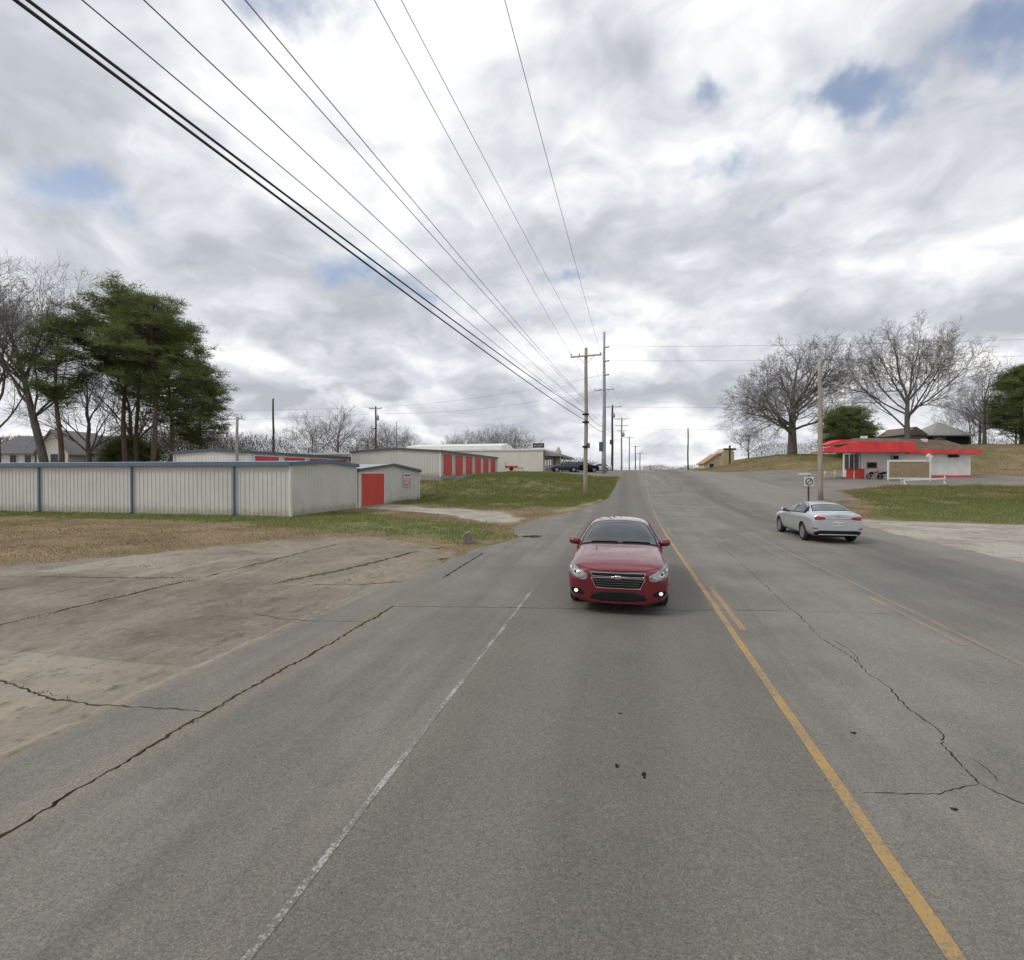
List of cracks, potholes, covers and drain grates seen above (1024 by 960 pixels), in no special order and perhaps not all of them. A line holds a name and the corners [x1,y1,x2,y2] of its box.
crack [0,537,1024,838]
